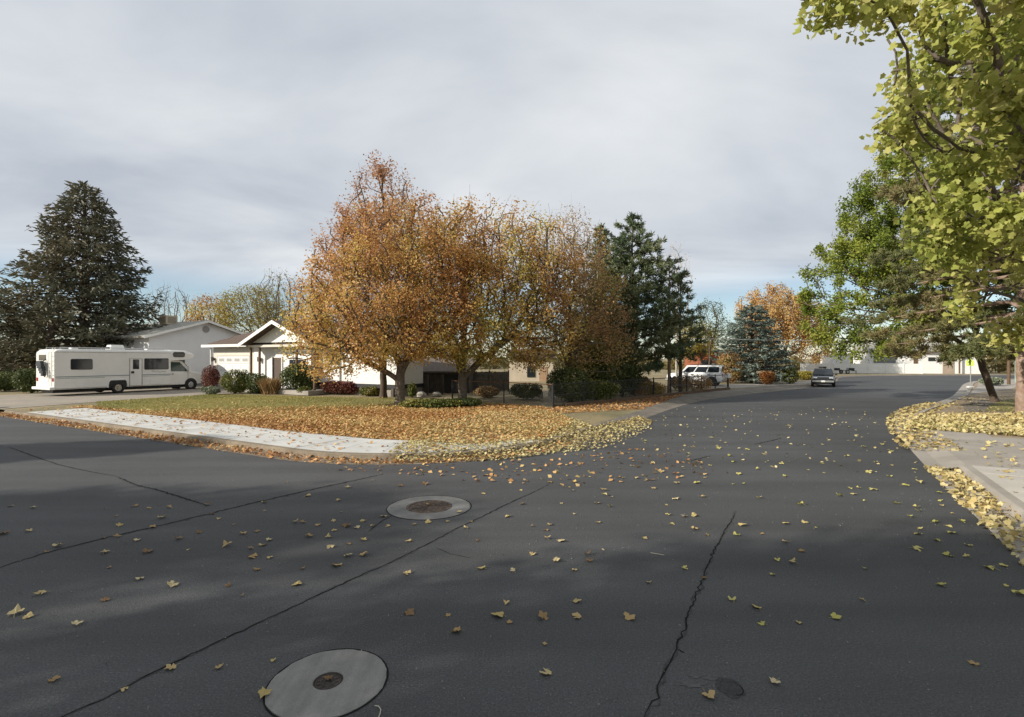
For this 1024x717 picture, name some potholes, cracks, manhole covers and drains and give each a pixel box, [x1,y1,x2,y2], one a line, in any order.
utility cover [263,648,389,717]
crack [644,511,735,717]
pothole [715,677,746,699]
manhole cover [386,495,472,520]
